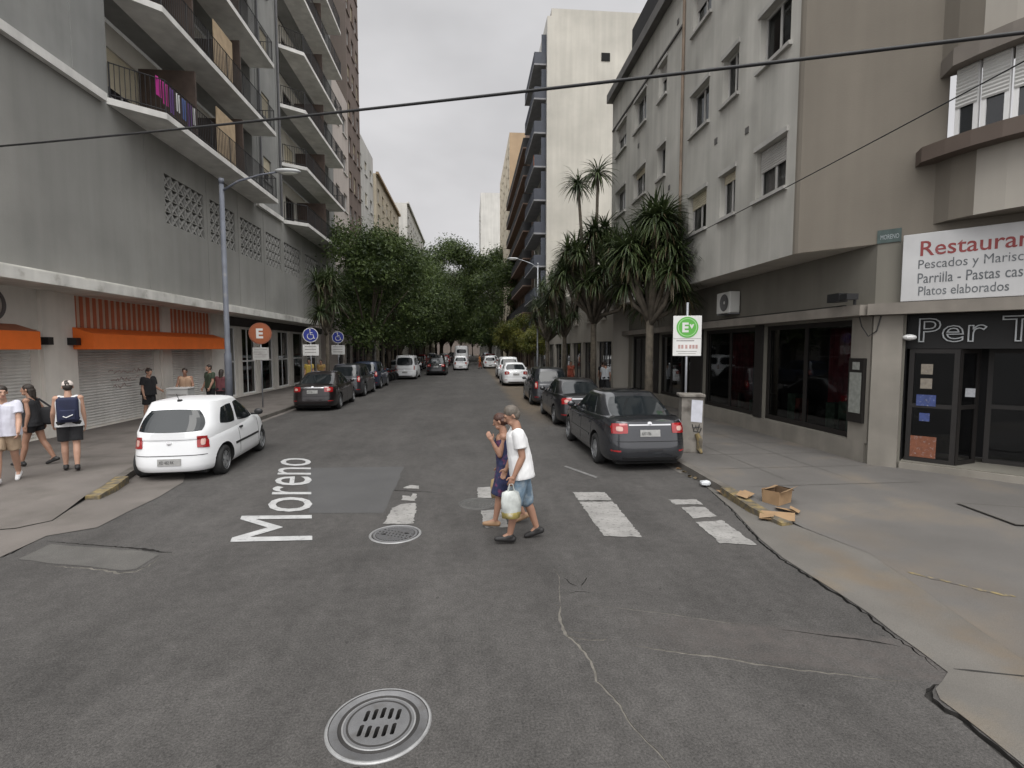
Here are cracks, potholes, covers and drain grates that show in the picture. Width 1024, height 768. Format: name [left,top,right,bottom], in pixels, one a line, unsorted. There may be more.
manhole cover [324,688,432,765]
manhole cover [458,498,495,510]
manhole cover [369,525,422,544]
crack [553,570,907,768]
